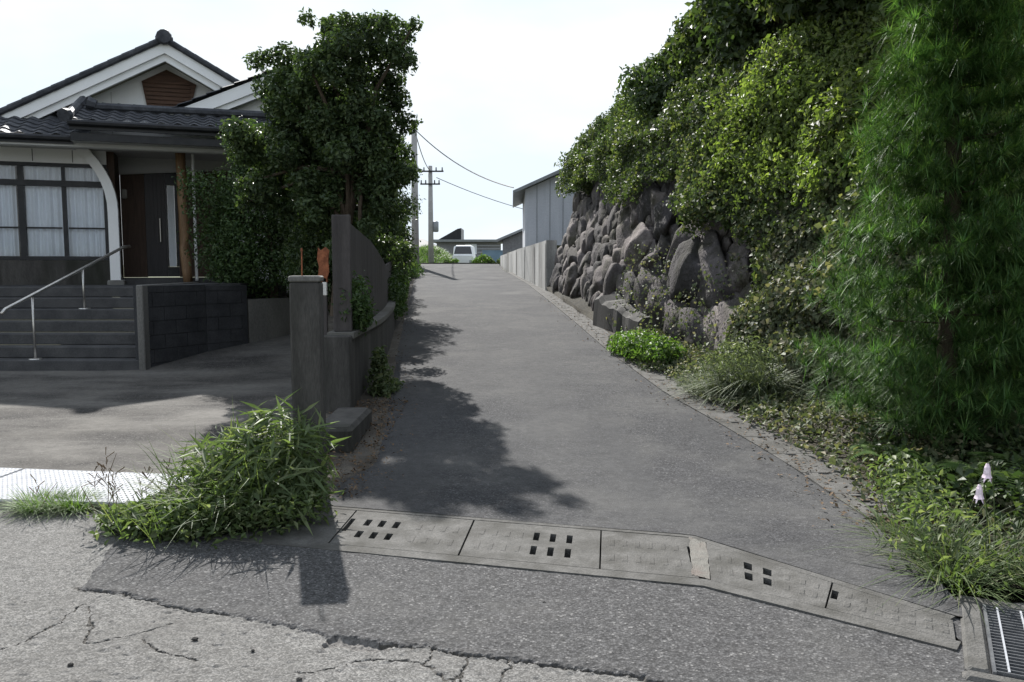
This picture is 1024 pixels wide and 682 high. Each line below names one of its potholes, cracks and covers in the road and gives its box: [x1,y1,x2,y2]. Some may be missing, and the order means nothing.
drain grate [982,604,1024,680]
crack [295,642,665,682]
crack [0,587,229,662]
pothole [322,635,392,652]
